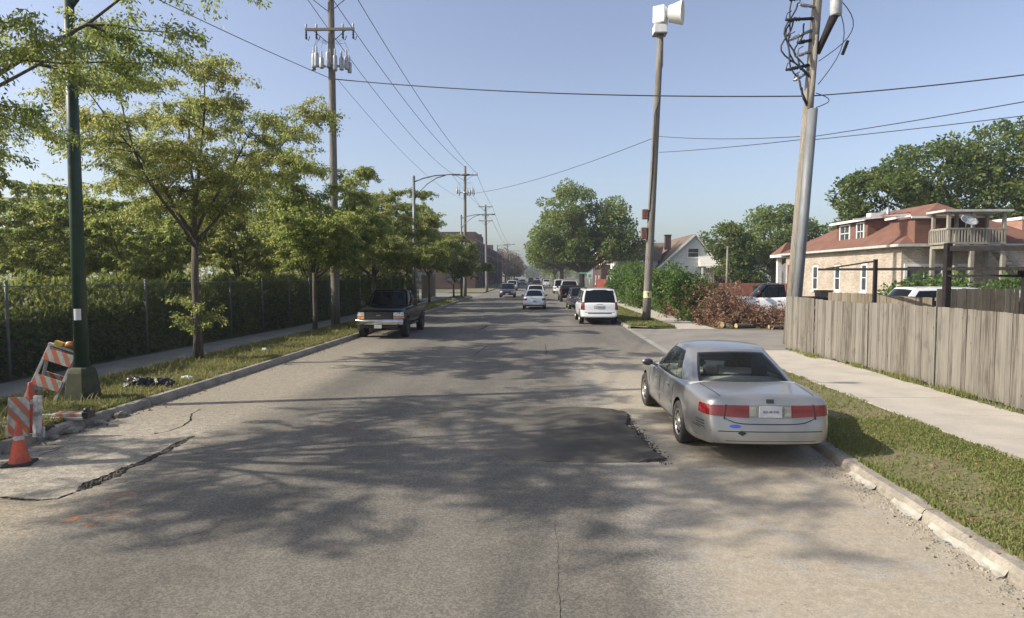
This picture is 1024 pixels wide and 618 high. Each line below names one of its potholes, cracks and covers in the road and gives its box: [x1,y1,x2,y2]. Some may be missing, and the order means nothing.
crack [554,510,583,618]
crack [0,408,202,501]
